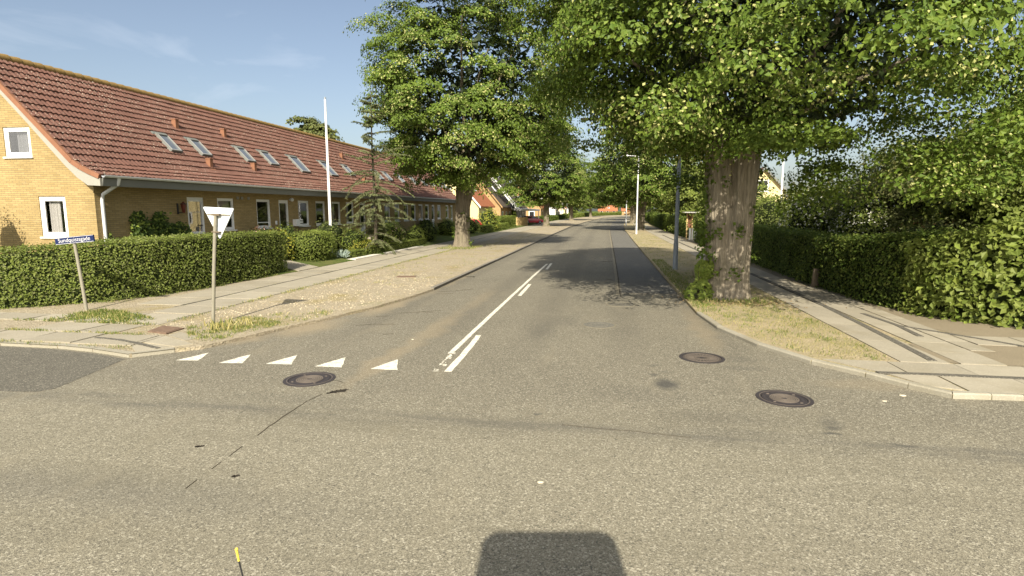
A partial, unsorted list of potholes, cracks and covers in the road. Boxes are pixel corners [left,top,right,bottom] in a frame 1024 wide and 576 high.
manhole cover [755,390,814,408]
manhole cover [283,372,336,387]
manhole cover [679,352,725,364]
utility cover [148,325,184,335]
crack [185,380,341,489]
